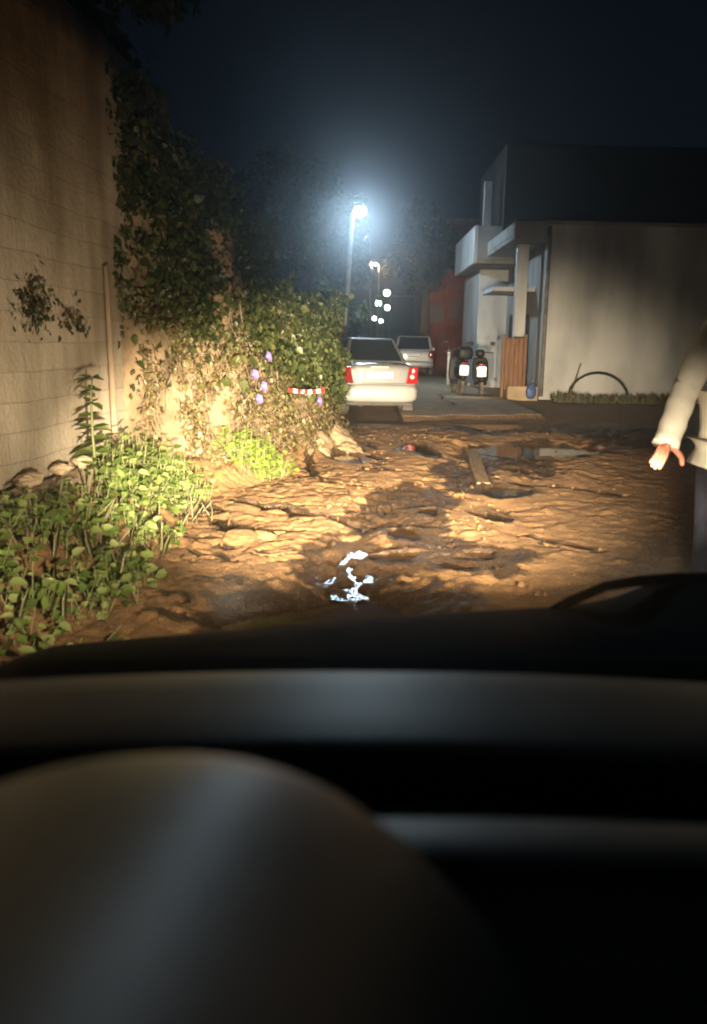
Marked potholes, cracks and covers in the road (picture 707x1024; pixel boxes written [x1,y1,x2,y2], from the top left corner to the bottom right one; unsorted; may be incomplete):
pothole [459,509,521,526]
pothole [392,441,453,463]
pothole [471,482,543,502]
